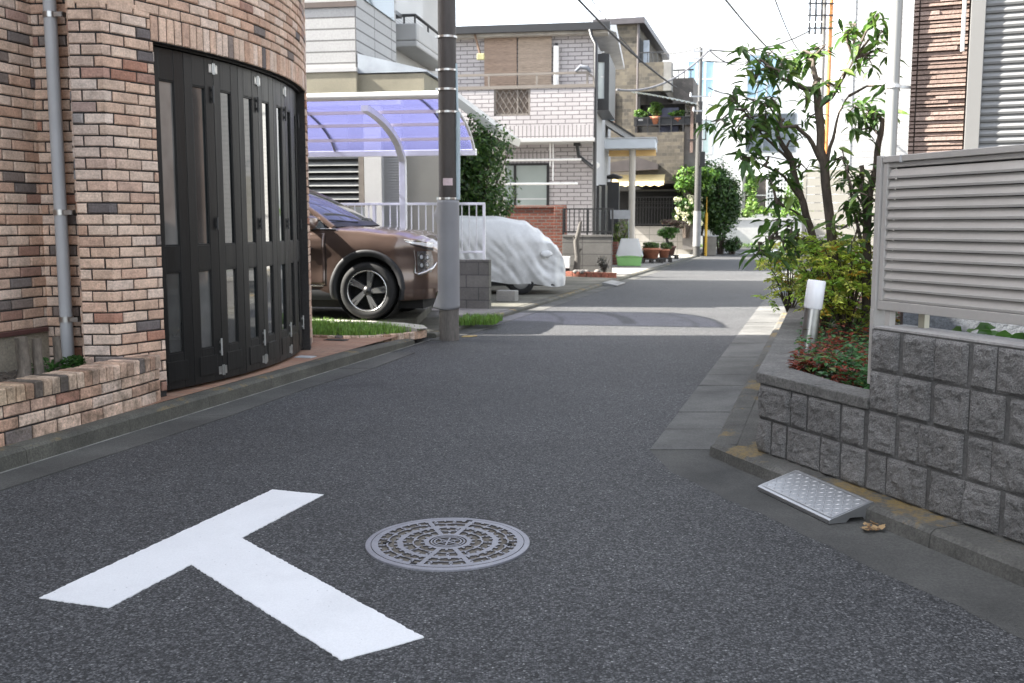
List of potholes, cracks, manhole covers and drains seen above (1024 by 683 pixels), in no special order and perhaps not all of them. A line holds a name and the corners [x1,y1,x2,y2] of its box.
manhole cover [365,518,530,572]
